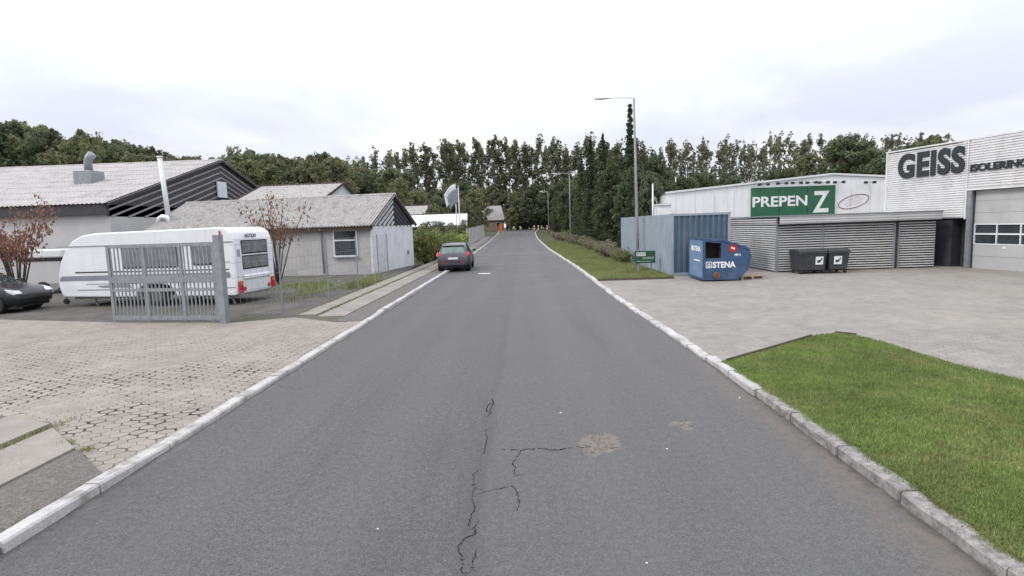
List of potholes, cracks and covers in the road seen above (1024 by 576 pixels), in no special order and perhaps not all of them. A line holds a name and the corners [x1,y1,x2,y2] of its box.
crack [457,399,572,576]
